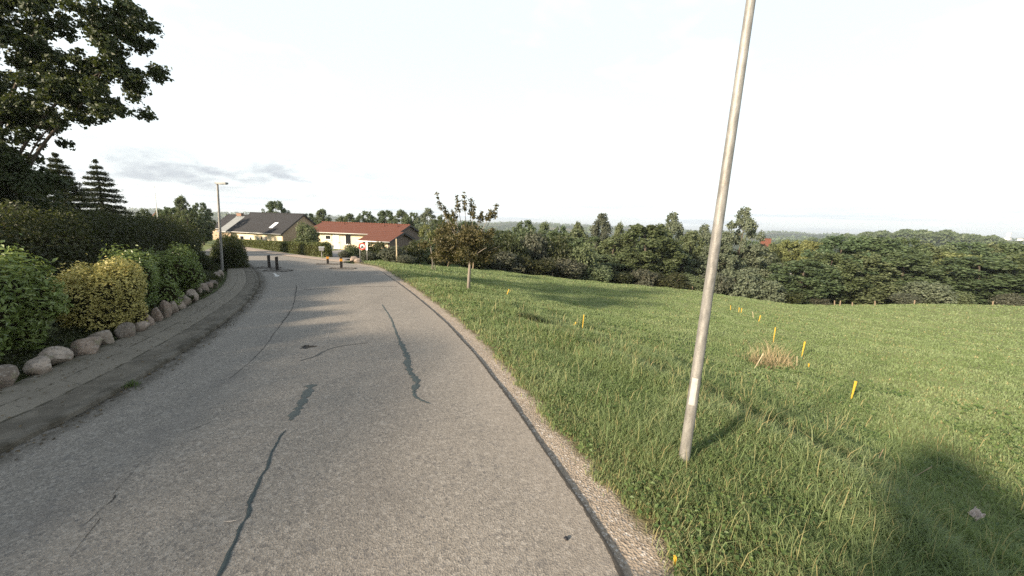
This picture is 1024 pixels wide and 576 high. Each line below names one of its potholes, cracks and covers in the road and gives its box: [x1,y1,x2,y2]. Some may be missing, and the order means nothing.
crack [72,464,139,554]
crack [230,285,297,378]
